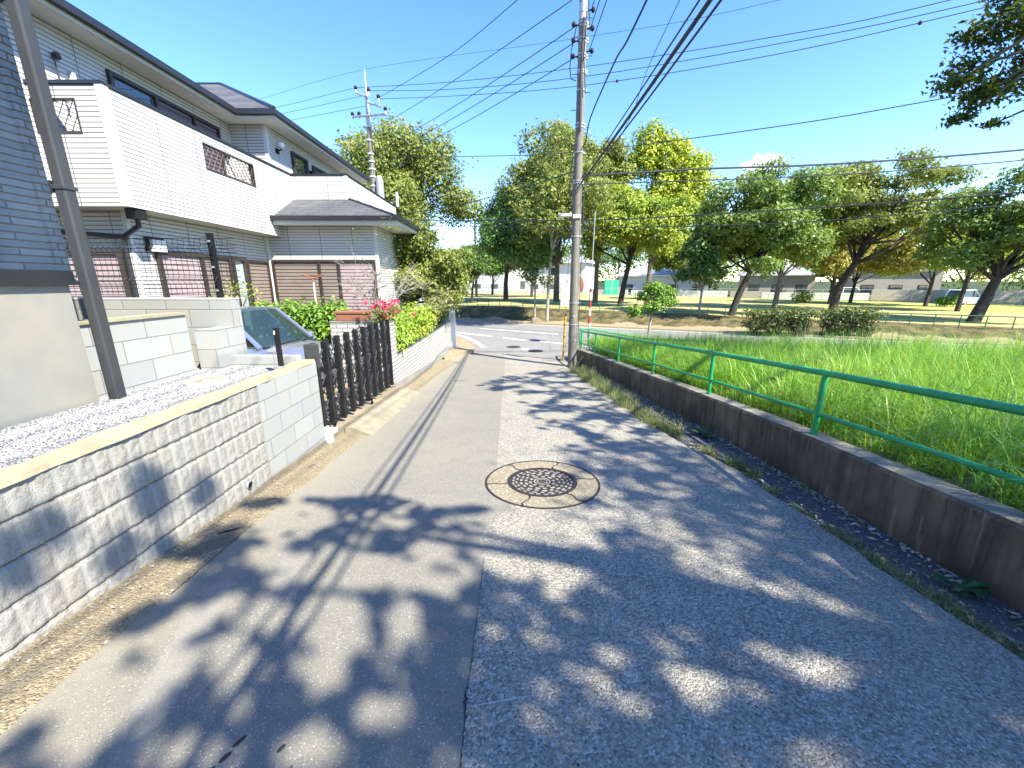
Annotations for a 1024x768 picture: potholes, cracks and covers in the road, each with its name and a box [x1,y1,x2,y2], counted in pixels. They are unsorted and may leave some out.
manhole cover [485,460,601,509]
